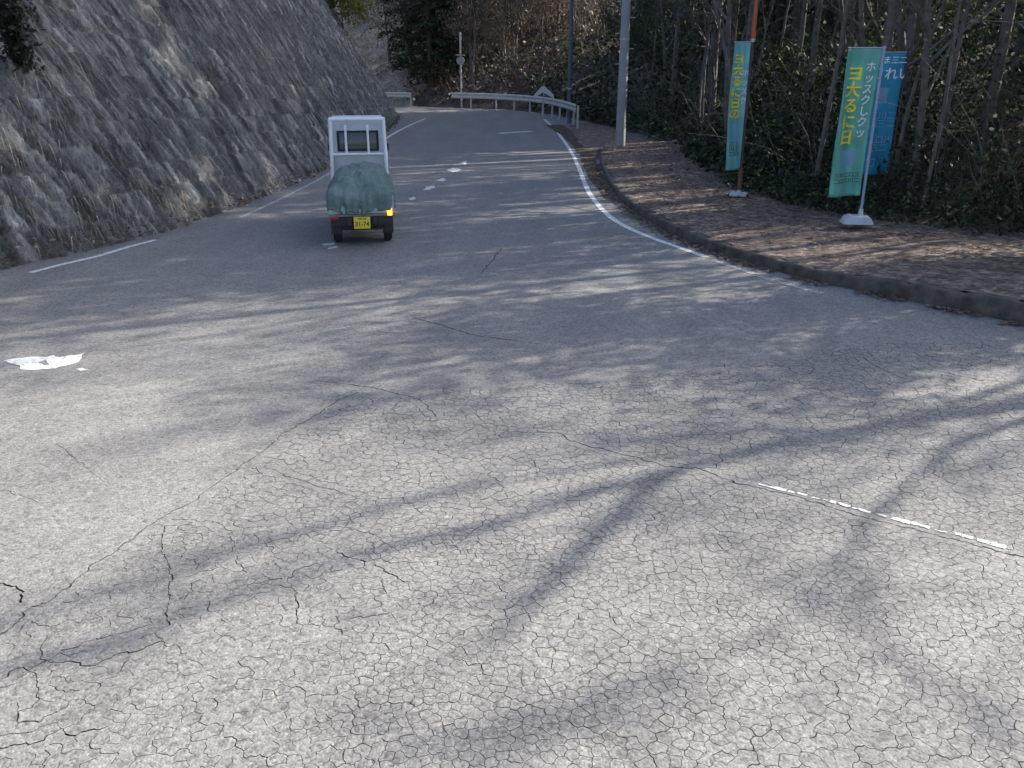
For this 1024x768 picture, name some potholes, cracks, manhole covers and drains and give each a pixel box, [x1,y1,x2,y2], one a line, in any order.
crack [0,336,1024,768]
crack [412,317,517,341]
